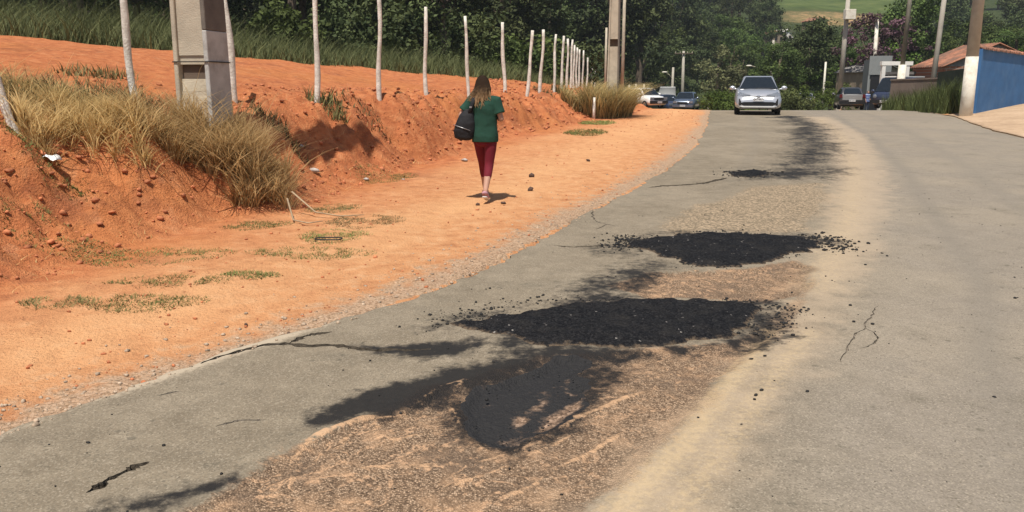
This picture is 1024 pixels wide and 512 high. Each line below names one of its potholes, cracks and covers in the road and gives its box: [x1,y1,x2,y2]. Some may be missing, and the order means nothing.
crack [840,305,879,362]
crack [201,332,428,364]
crack [648,178,727,188]
crack [86,461,149,493]
